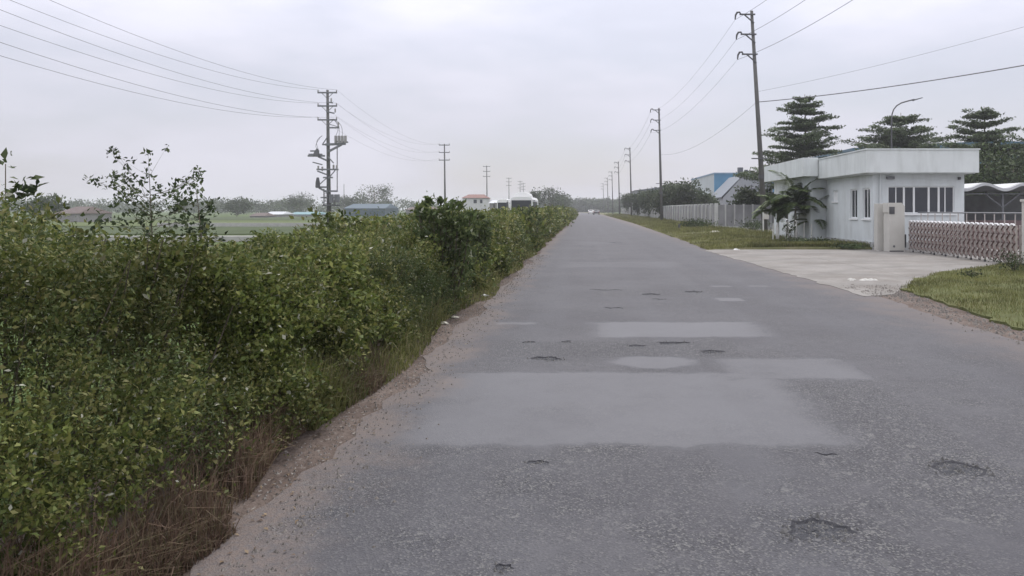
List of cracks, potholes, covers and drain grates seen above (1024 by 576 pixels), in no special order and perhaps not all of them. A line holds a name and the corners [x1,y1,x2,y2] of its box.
pothole [927,456,995,478]
pothole [494,561,514,574]
pothole [780,513,858,542]
